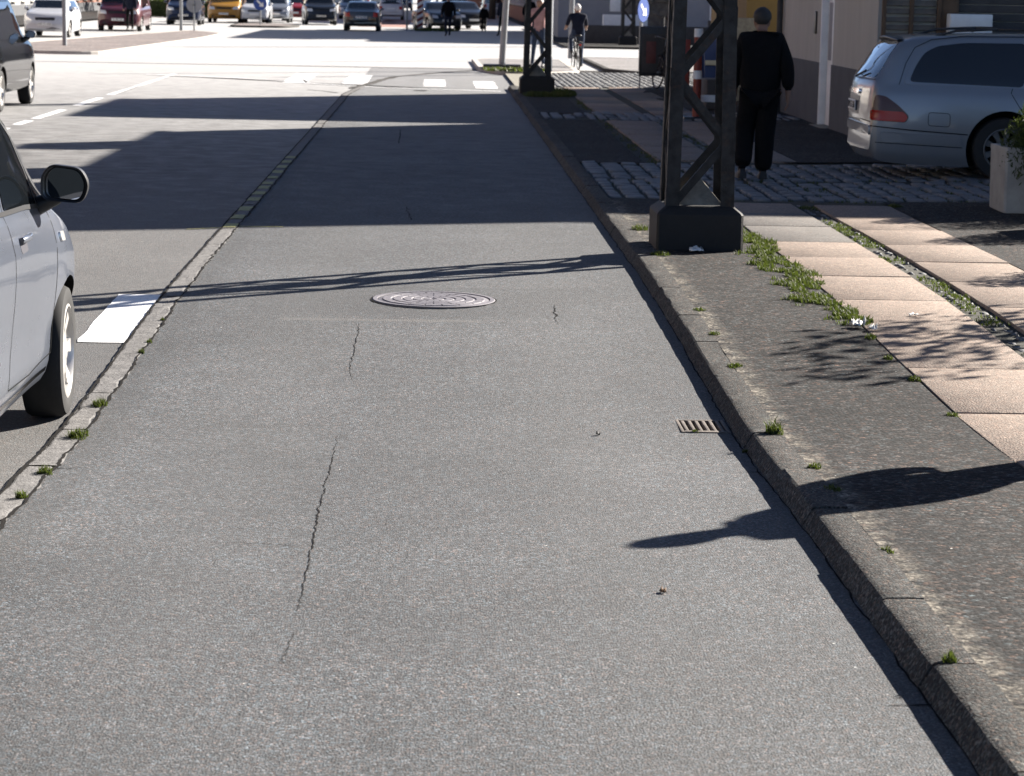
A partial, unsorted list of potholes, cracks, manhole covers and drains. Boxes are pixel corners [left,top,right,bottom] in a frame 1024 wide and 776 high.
drain grate [675,419,730,433]
crack [244,437,338,611]
manhole cover [370,291,497,309]
